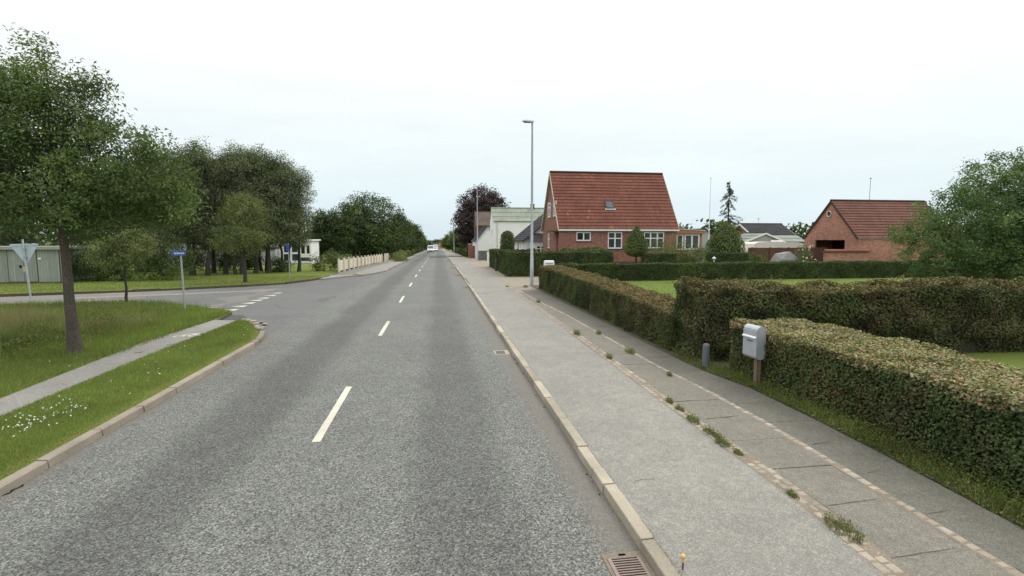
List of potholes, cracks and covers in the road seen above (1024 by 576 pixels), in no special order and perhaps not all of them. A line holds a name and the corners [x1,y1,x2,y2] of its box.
drain grate [601,551,656,576]
